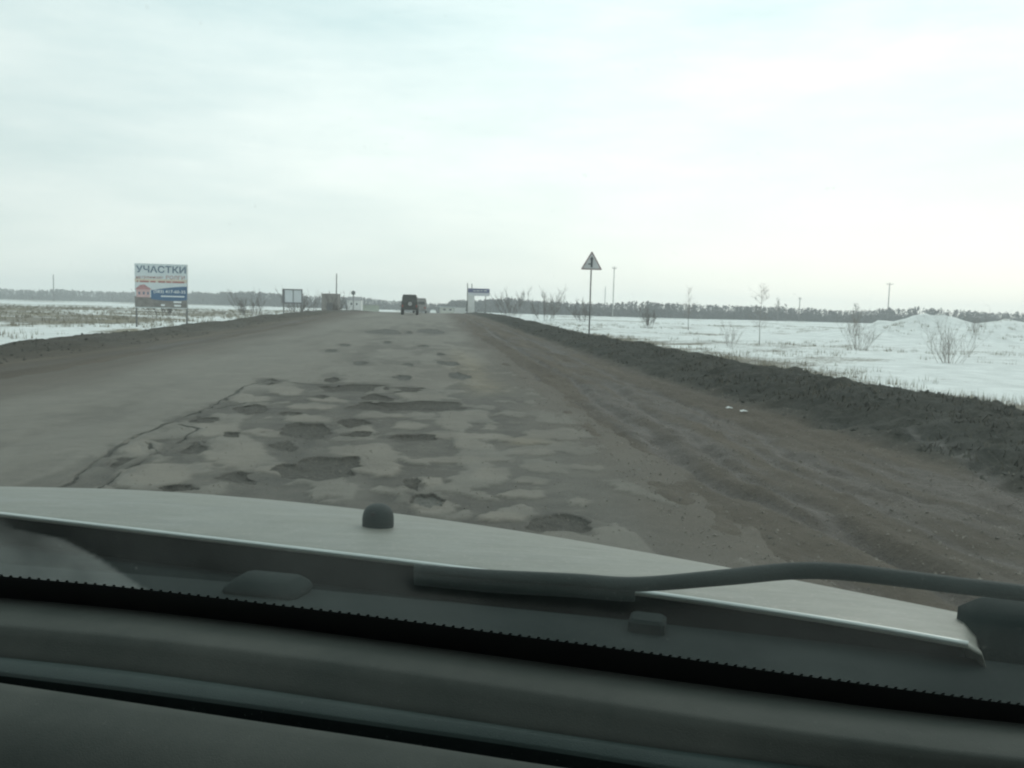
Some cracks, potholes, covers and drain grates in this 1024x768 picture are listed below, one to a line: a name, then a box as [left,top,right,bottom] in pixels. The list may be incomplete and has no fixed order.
pothole [394,491,458,511]
pothole [147,481,212,493]
pothole [247,454,374,485]
pothole [333,400,475,413]
pothole [513,511,609,536]
pothole [161,440,217,456]
crack [53,380,339,489]
pothole [274,421,341,442]
pothole [203,469,282,488]
pothole [379,433,451,443]
